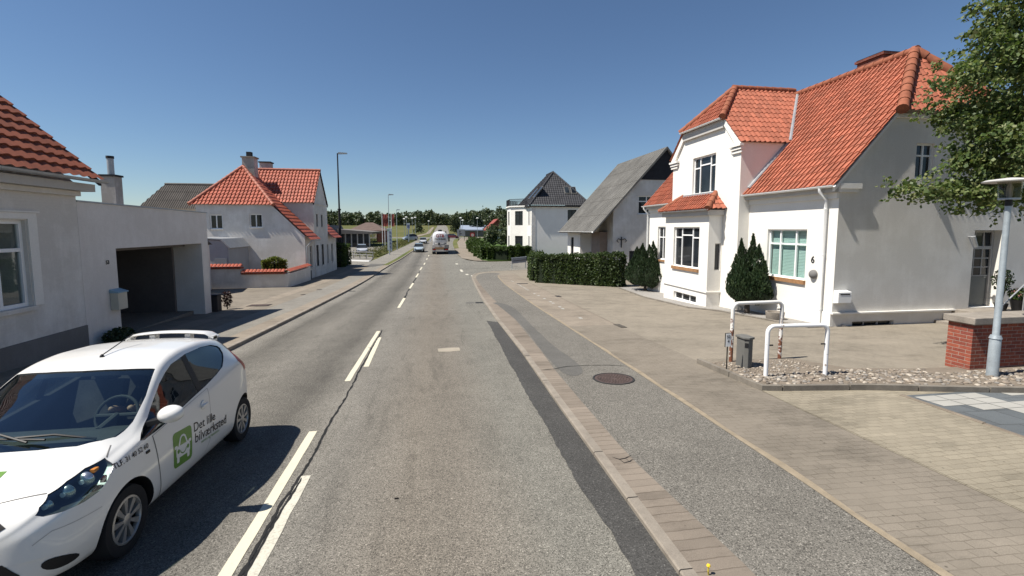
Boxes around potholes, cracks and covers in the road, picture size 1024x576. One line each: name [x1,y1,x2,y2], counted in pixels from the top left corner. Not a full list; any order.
manhole cover [593,373,635,385]
